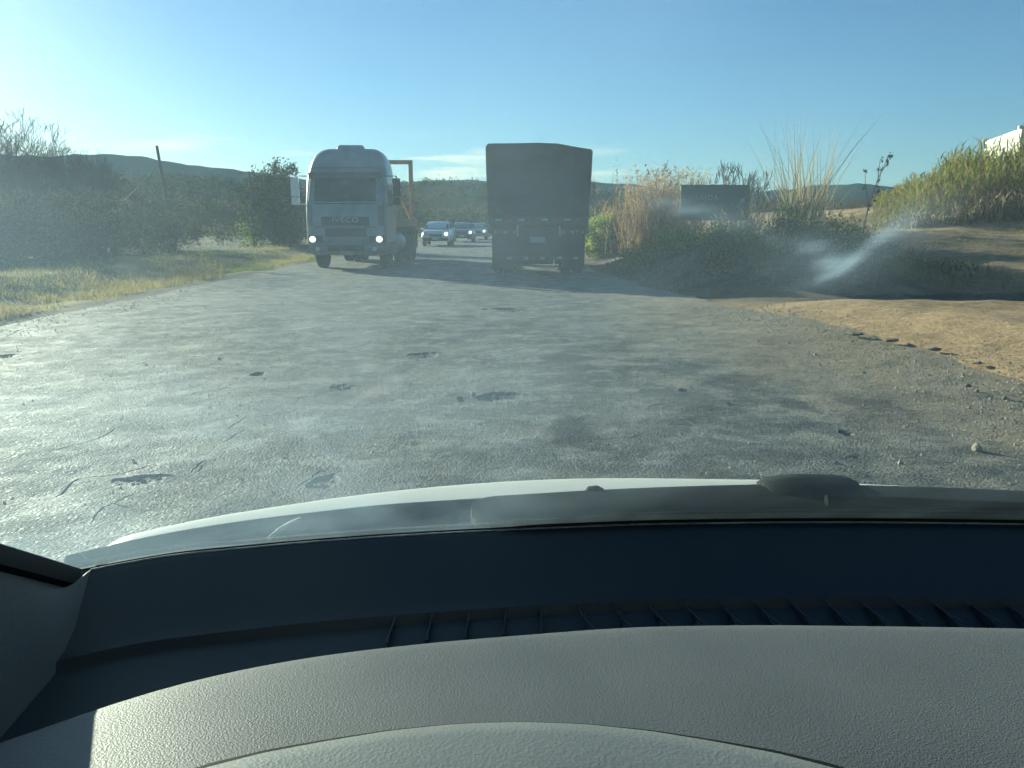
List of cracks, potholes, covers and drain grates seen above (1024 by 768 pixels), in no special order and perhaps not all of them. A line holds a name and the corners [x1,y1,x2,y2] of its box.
pothole [305,473,340,490]
pothole [110,474,176,486]
crack [41,464,153,523]
pothole [474,392,522,402]
